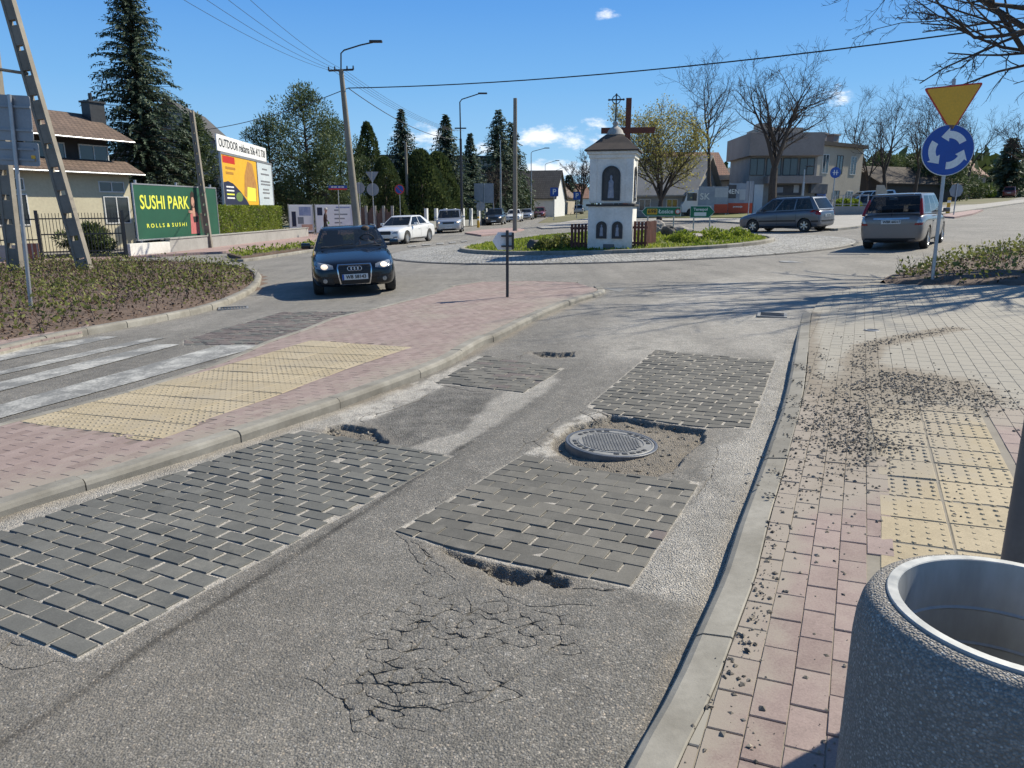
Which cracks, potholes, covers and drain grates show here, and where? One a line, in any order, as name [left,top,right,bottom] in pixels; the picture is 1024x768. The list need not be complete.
crack [306,582,610,739]
pothole [321,424,391,444]
crack [395,533,455,579]
pothole [434,545,574,590]
manhole cover [565,428,658,461]
pothole [531,351,576,359]
